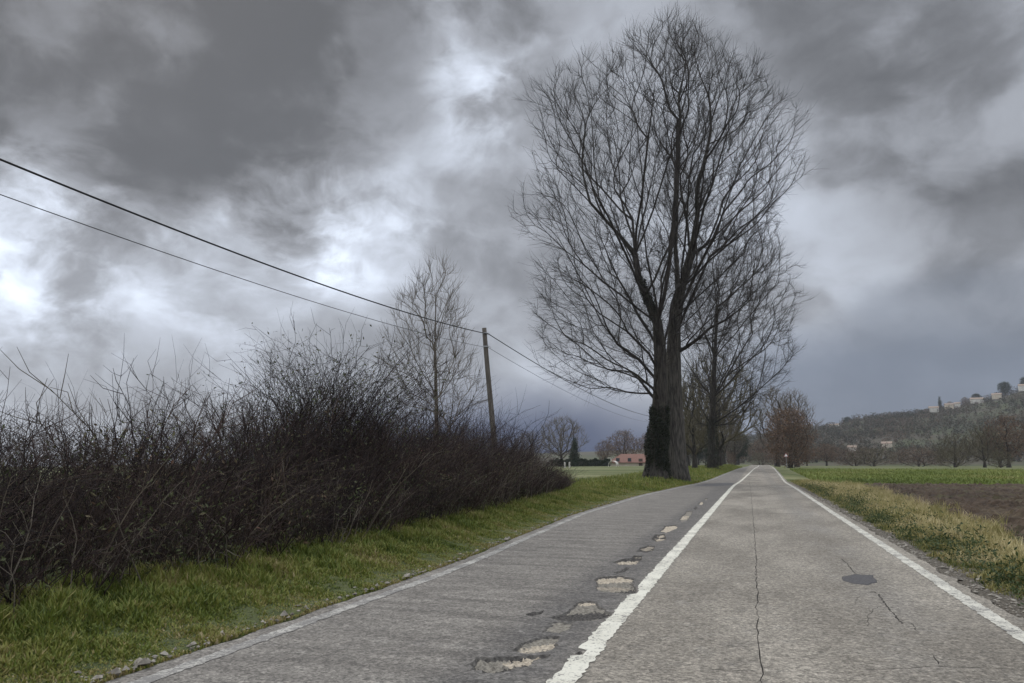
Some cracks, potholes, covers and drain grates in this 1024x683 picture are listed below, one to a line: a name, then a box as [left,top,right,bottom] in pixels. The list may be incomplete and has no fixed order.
pothole [551,601,612,622]
crack [856,592,921,633]
pothole [513,636,560,654]
pothole [543,621,575,633]
pothole [469,654,551,674]
pothole [594,576,637,594]
crack [703,487,764,683]
pothole [614,555,642,565]
